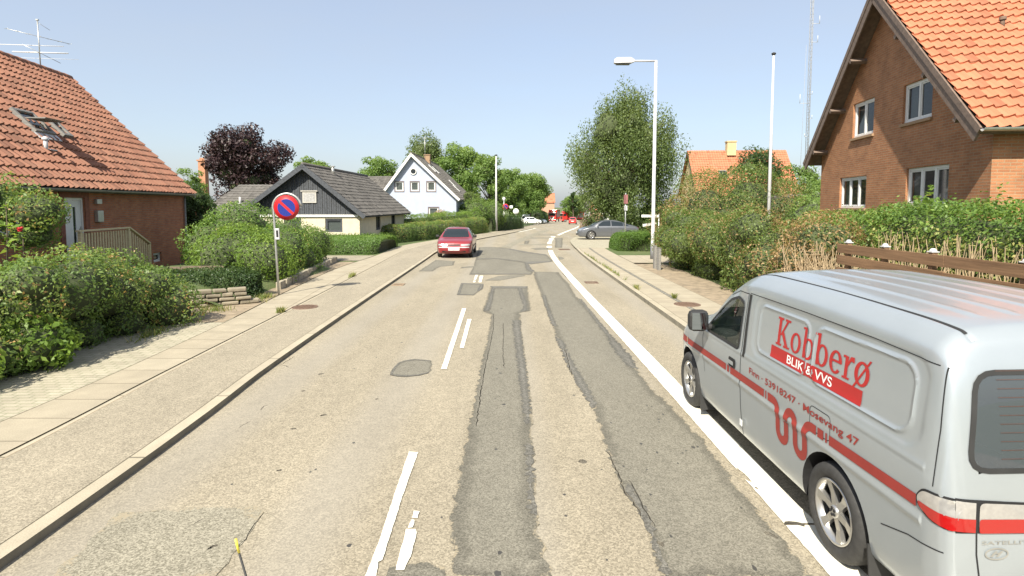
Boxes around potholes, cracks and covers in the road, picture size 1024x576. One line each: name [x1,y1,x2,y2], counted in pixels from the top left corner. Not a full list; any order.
crack [607,452,641,517]
crack [476,314,505,426]
